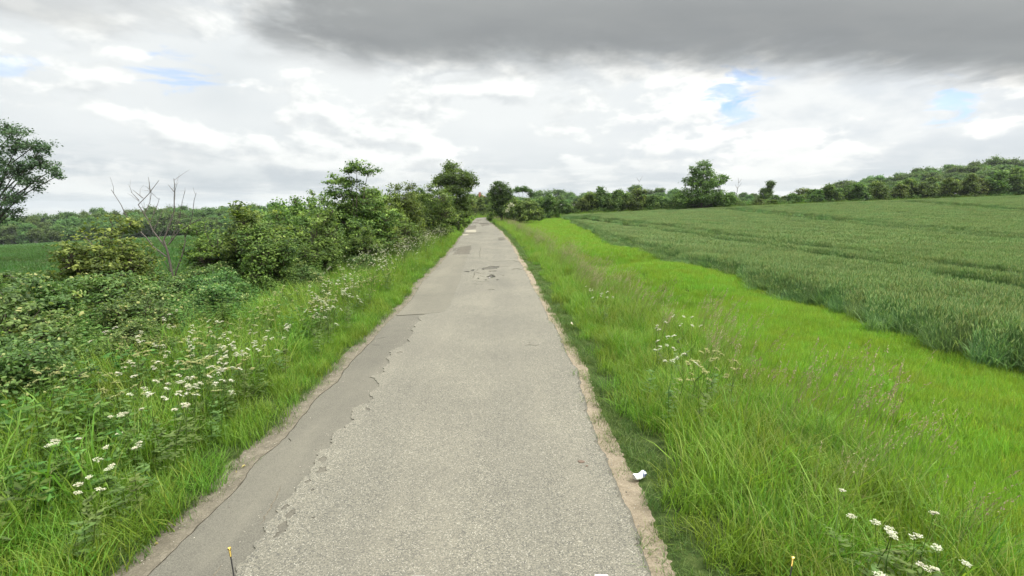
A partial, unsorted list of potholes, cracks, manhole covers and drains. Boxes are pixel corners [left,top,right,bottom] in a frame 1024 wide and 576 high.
crack [147,338,379,576]
